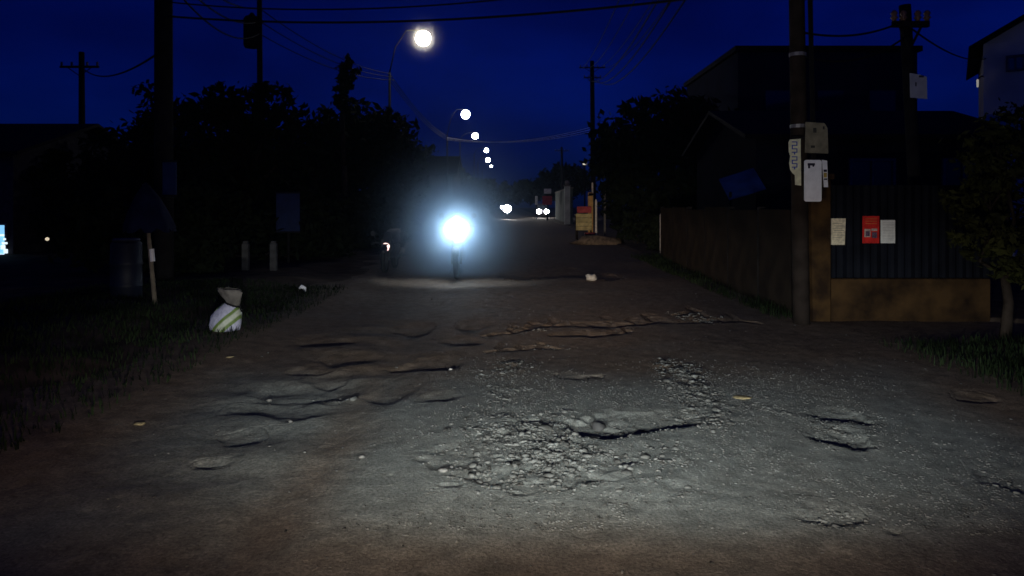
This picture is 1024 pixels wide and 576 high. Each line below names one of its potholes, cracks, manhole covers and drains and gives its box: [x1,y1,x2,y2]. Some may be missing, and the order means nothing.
pothole [504,398,760,440]
pothole [794,420,881,452]
pothole [380,414,642,512]
pothole [805,399,876,425]
